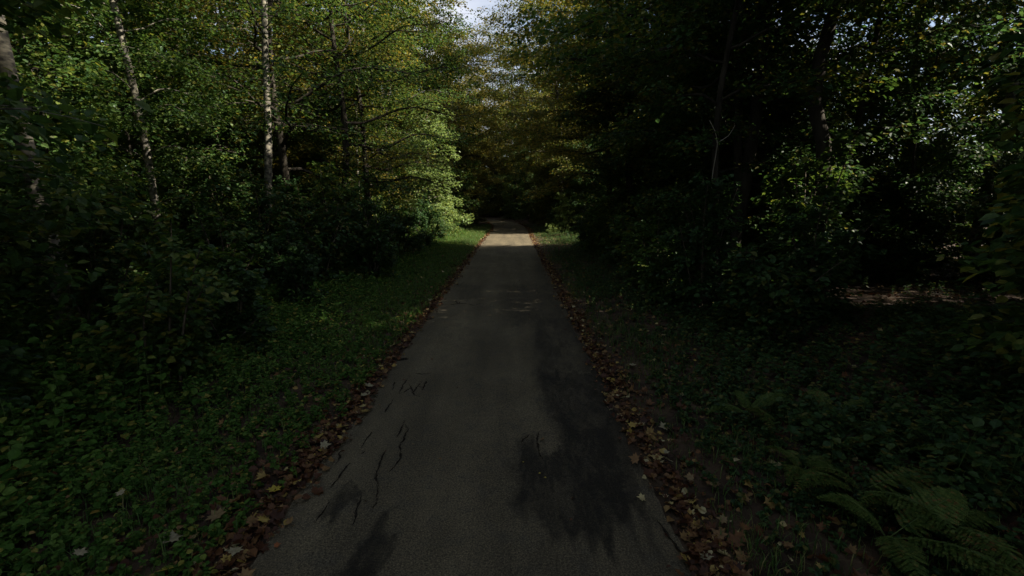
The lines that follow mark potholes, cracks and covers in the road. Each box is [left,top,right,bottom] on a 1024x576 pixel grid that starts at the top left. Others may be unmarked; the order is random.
crack [315,373,430,524]
